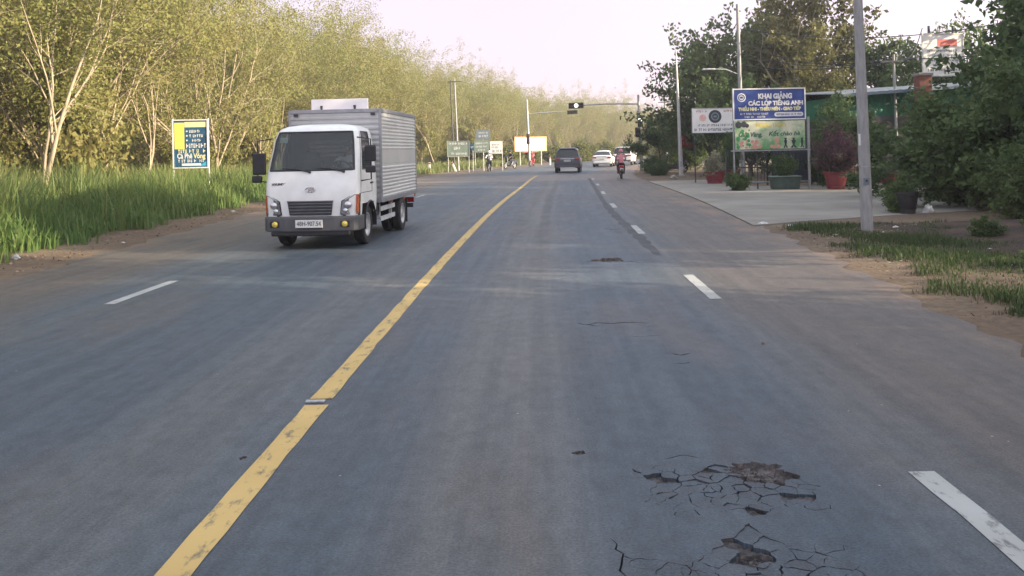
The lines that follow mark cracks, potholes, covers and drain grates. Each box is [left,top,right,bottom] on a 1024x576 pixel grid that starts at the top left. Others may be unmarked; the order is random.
pothole [737,554,773,568]
crack [615,455,865,576]
pothole [724,461,790,486]
